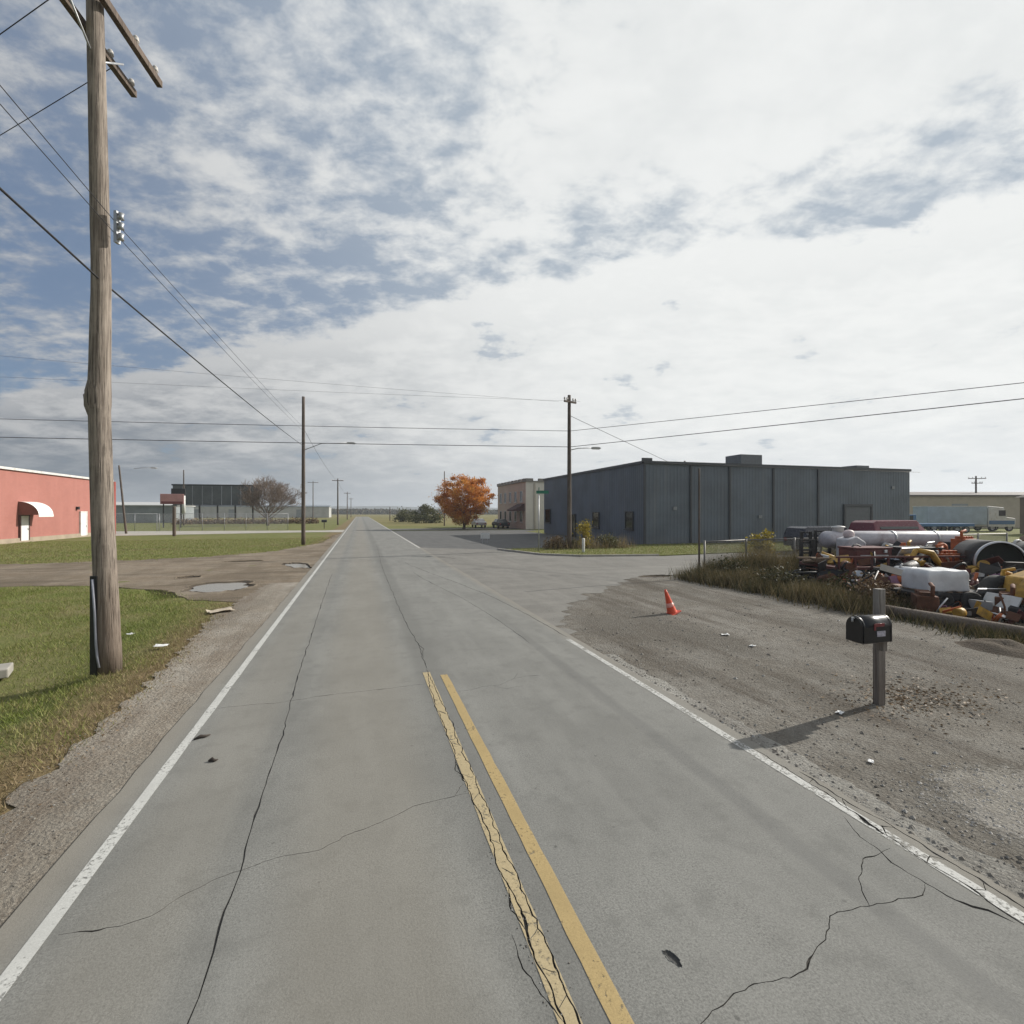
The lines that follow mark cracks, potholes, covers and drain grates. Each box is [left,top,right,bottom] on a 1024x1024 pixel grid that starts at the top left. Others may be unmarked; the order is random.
crack [700,751,1024,1024]
crack [60,546,581,1024]
pothole [662,949,683,968]
pothole [180,580,259,593]
